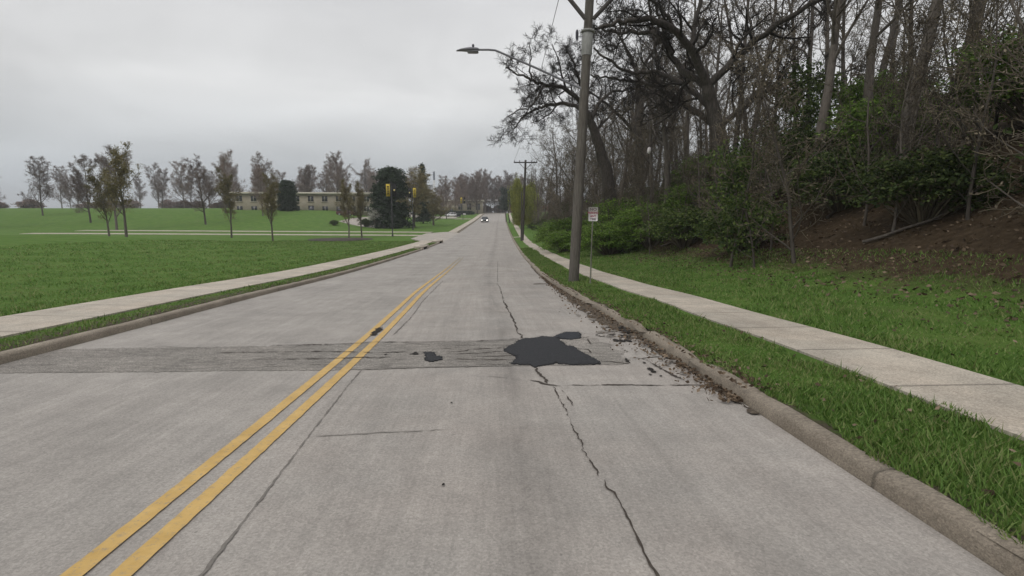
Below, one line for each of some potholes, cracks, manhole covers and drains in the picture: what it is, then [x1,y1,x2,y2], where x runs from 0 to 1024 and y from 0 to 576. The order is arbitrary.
crack [532,367,599,477]
crack [587,330,684,380]
